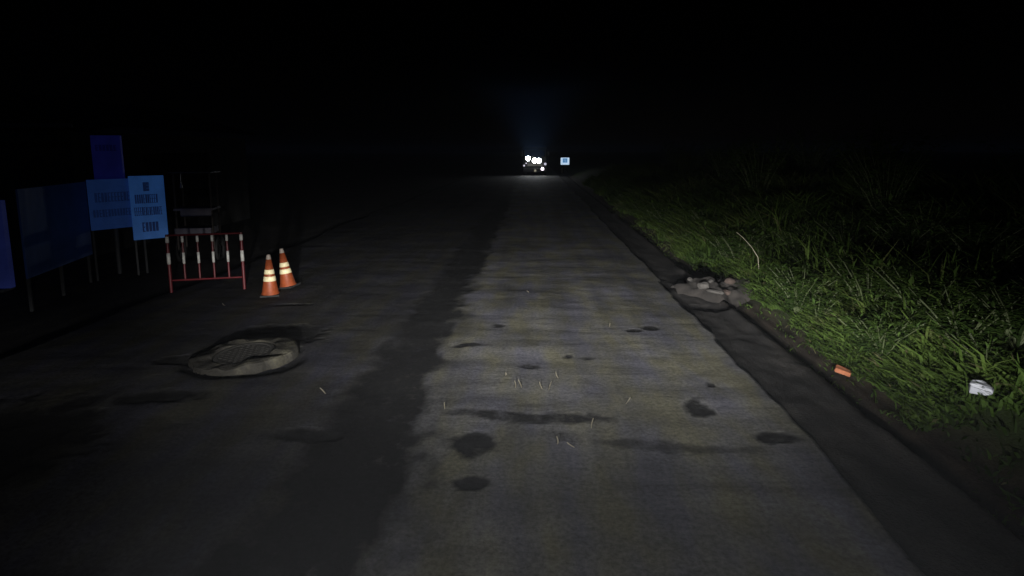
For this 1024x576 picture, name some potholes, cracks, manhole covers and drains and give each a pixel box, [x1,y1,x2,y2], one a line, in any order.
pothole [260,426,347,445]
pothole [441,429,507,463]
pothole [103,387,216,406]
pothole [748,430,810,446]
pothole [680,394,719,418]
manhole cover [188,337,300,378]
pothole [446,474,498,492]
